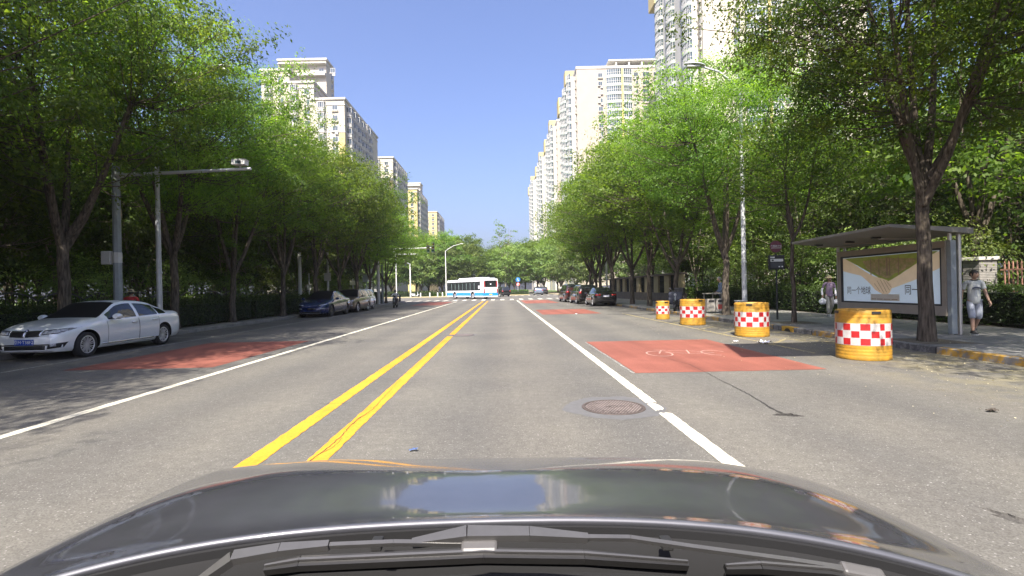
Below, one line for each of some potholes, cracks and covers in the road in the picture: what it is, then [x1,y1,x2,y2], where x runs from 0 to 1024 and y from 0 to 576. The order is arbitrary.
manhole cover [562,396,667,420]
